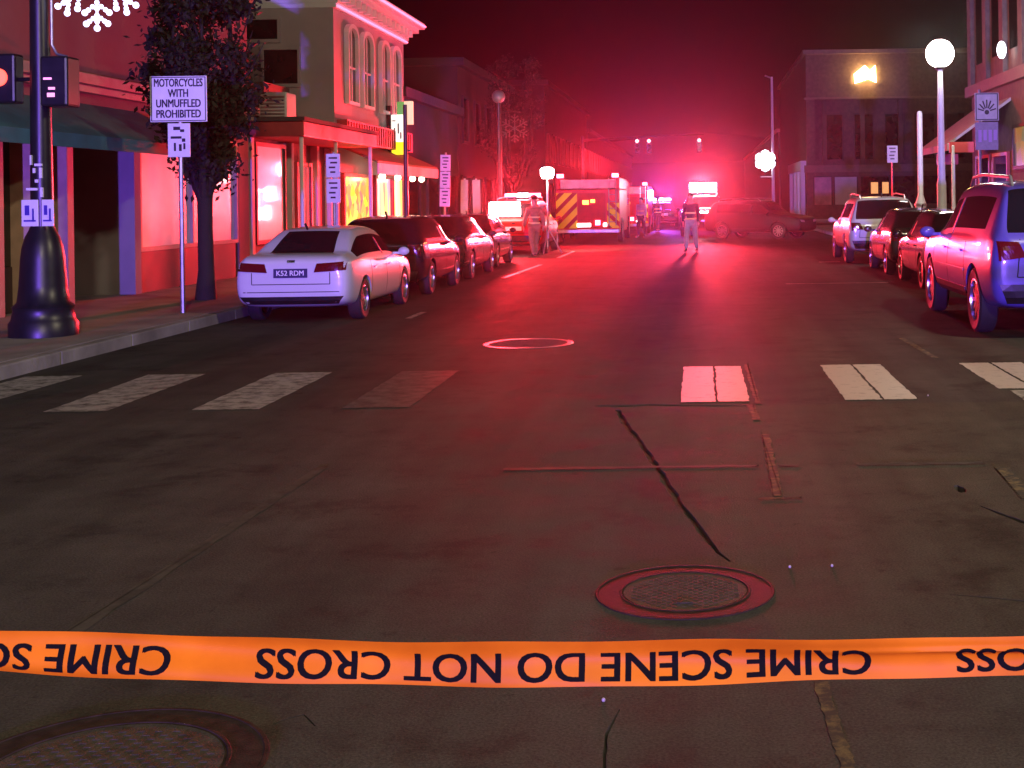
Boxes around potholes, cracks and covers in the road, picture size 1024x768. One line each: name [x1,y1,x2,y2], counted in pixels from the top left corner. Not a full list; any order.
crack [602,709,620,768]
manhole cover [483,338,574,349]
manhole cover [595,565,775,620]
manhole cover [0,708,270,768]
crack [981,506,1024,523]
